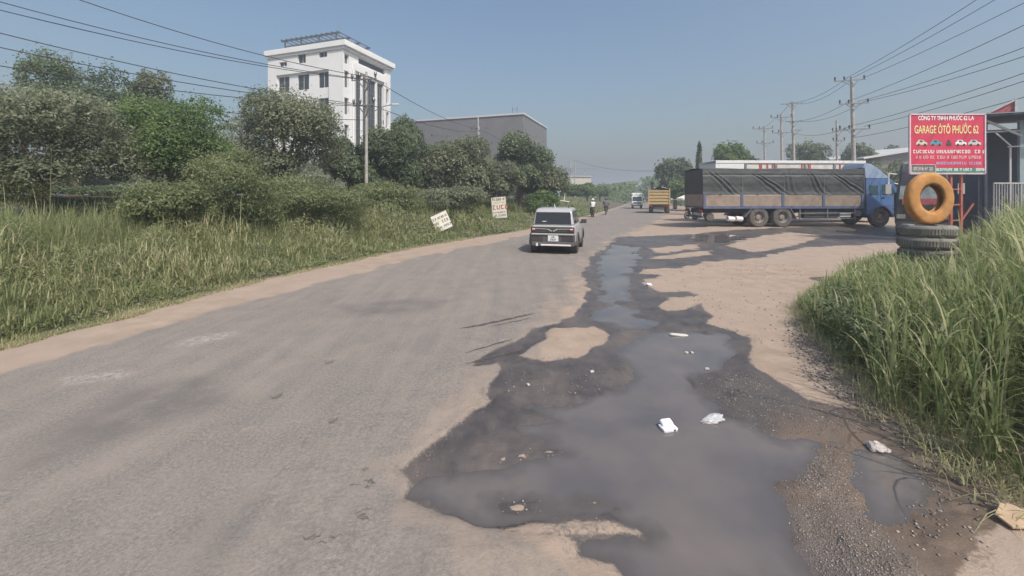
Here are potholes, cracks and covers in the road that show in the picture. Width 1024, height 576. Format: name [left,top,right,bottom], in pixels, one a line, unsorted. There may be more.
crack [464,313,533,363]
pothole [549,241,726,333]
pothole [680,232,763,243]
